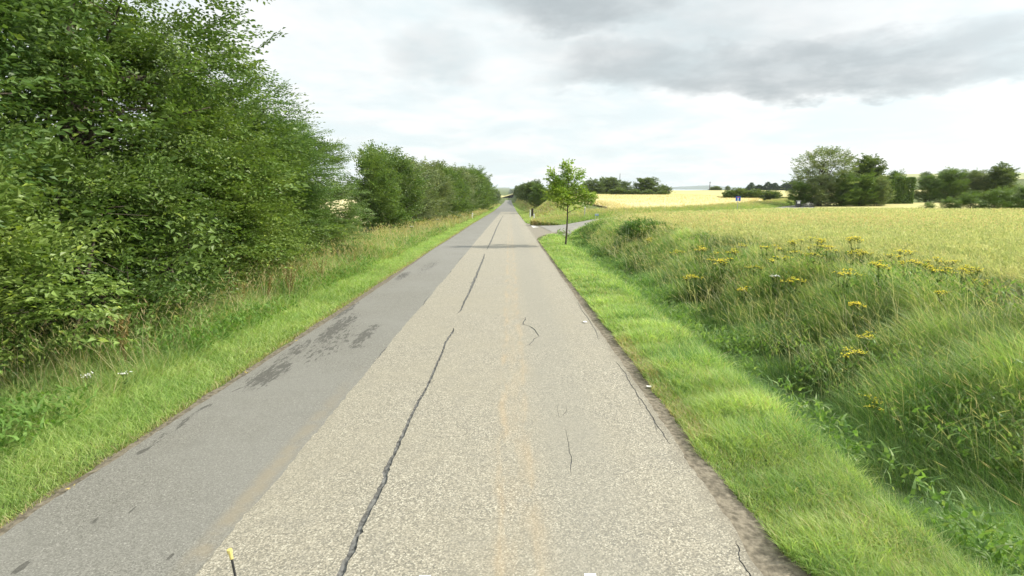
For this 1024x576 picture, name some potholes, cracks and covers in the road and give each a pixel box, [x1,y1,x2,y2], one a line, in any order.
crack [336,216,503,576]
crack [618,364,669,443]
